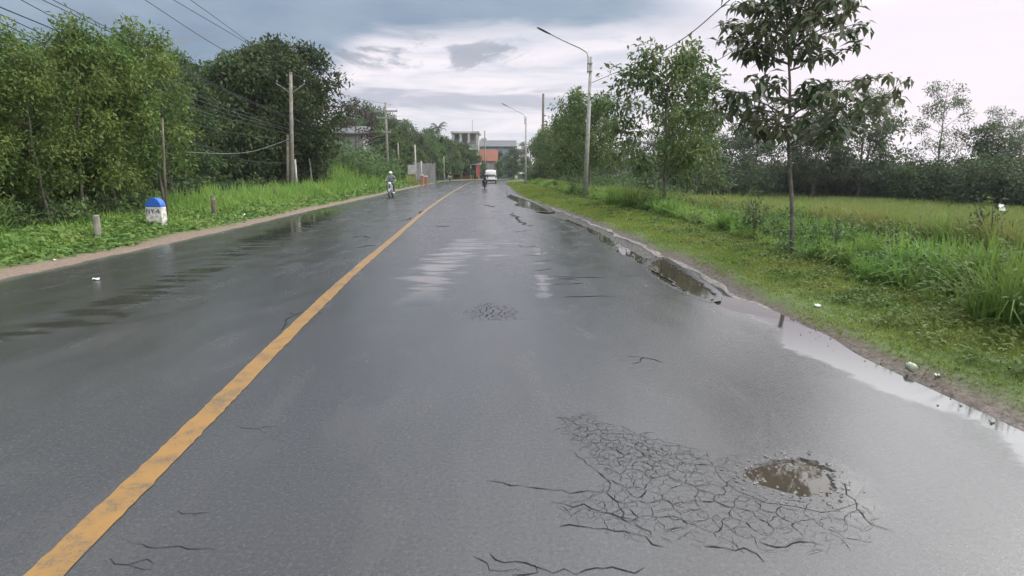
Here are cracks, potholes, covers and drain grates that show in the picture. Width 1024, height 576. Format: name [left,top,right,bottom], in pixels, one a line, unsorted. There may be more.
pothole [715,445,866,512]
crack [110,543,215,569]
crack [487,410,887,562]
crack [474,555,643,575]
pothole [642,257,722,303]
pothole [501,194,556,213]
crack [486,205,615,298]
